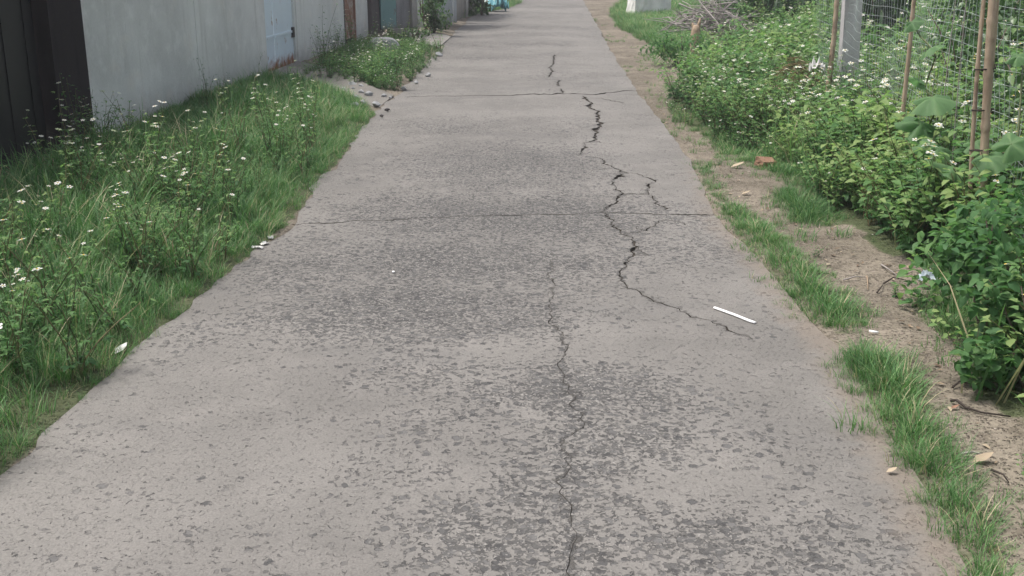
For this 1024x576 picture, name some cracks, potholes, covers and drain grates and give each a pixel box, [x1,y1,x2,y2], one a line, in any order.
crack [547,263,585,576]
crack [292,55,735,333]
